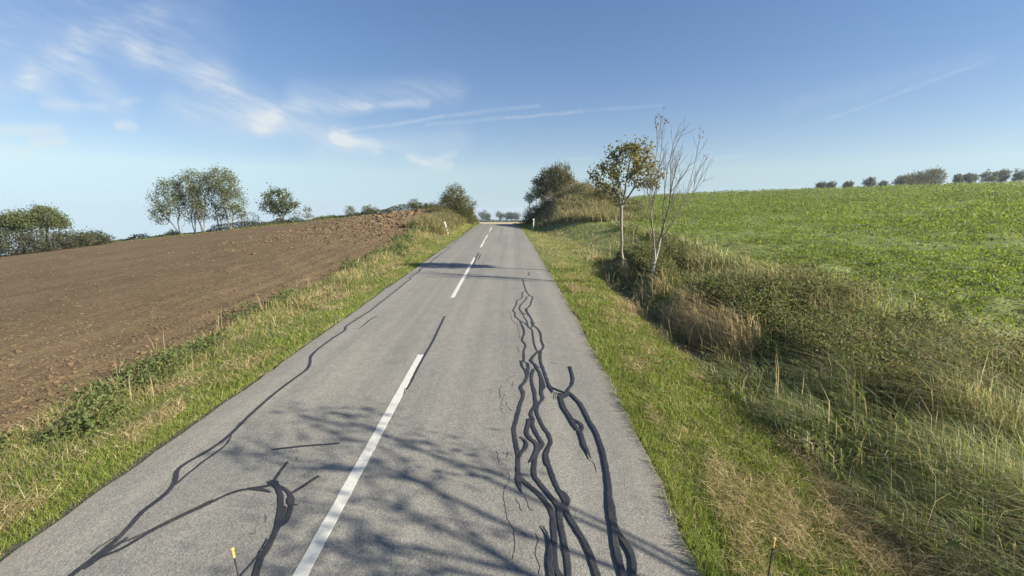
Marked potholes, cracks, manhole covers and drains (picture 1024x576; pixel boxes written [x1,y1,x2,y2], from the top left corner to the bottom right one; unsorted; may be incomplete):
crack [496,451,530,556]
